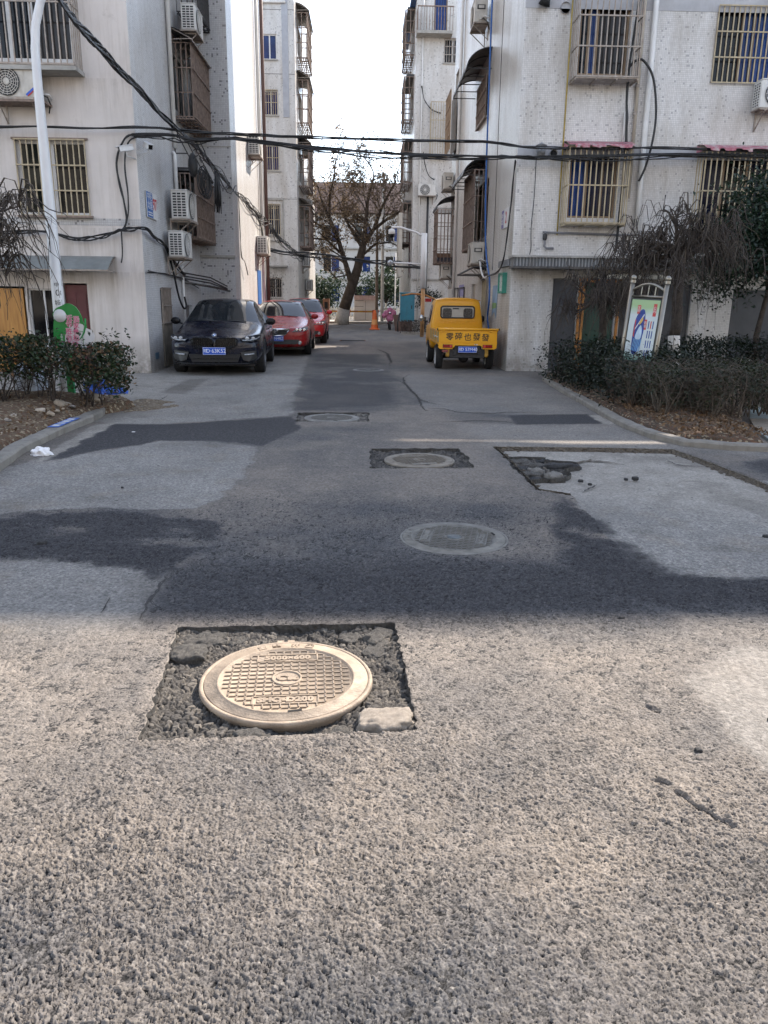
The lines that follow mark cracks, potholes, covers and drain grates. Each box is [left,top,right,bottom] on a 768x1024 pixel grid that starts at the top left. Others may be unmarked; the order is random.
pothole [138,622,417,741]
manhole cover [304,414,359,422]
manhole cover [400,522,508,555]
manhole cover [199,640,373,733]
pothole [503,456,580,484]
manhole cover [384,453,455,468]
crack [378,349,515,424]
